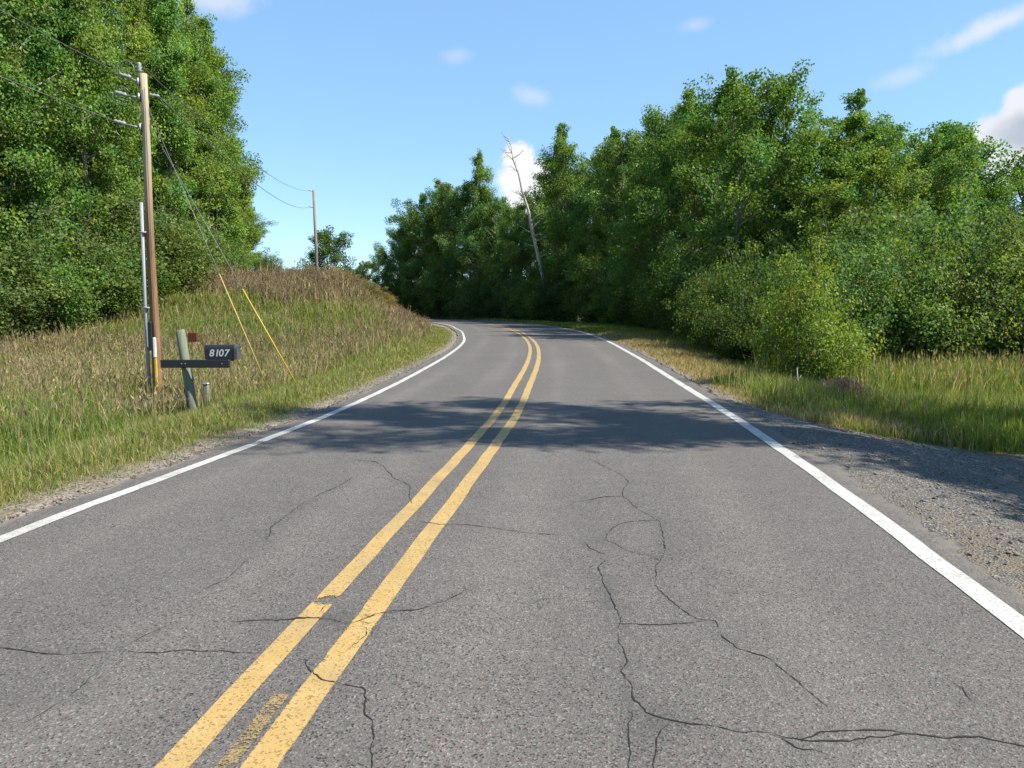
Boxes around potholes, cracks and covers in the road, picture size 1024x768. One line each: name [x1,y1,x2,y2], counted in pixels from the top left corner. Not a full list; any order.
crack [305,659,375,766]
crack [232,589,466,650]
crack [586,461,1024,768]
crack [0,628,258,655]
